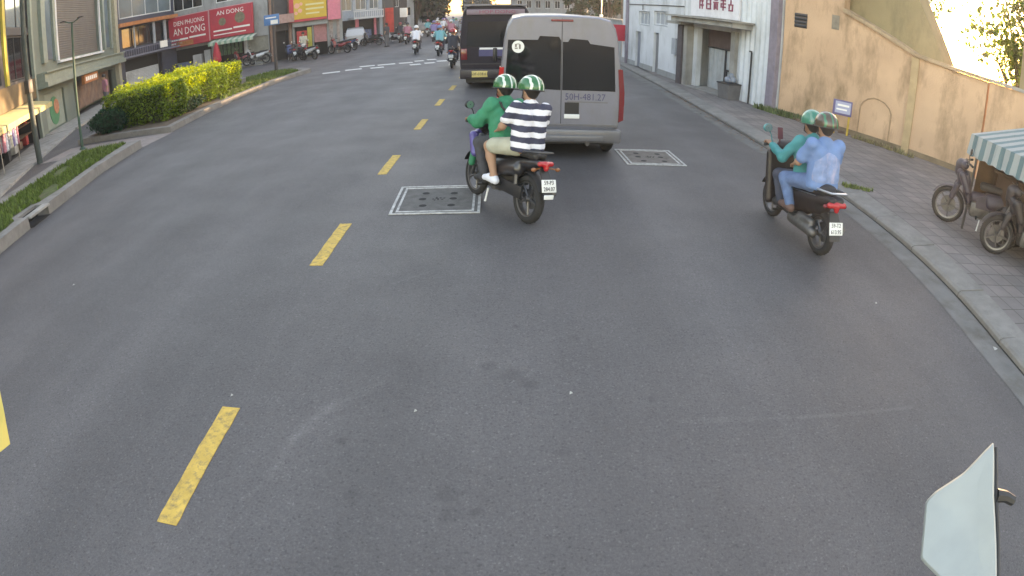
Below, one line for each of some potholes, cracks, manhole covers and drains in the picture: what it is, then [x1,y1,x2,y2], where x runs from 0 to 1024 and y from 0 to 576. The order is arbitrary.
drain grate [22,203,50,228]
manhole cover [614,149,687,166]
manhole cover [388,185,481,215]
